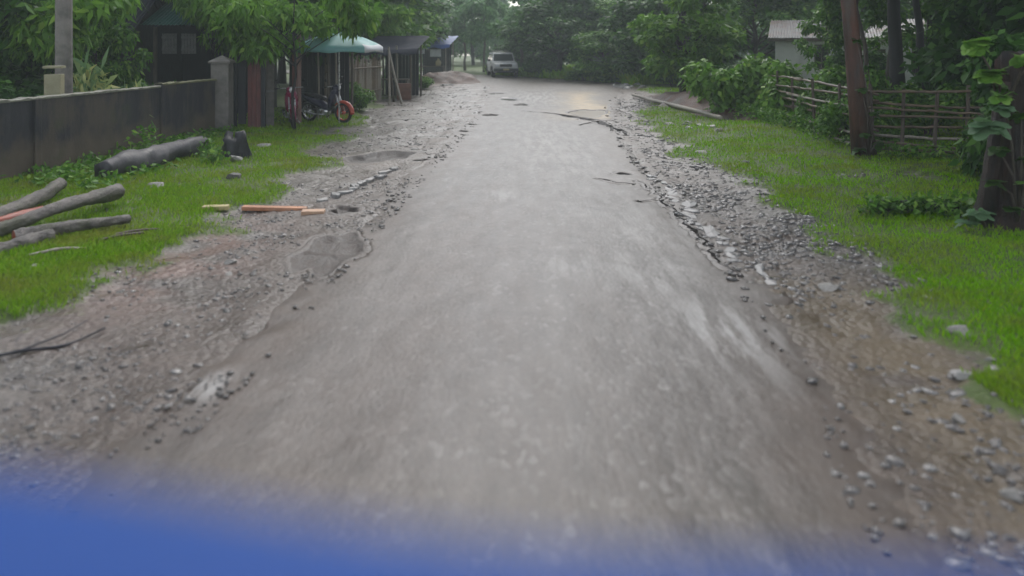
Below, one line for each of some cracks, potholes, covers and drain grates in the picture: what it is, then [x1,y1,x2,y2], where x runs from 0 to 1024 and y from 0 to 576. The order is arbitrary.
pothole [325,204,366,216]
crack [595,178,744,278]
crack [525,111,630,136]
pothole [281,230,371,279]
pothole [336,150,421,164]
